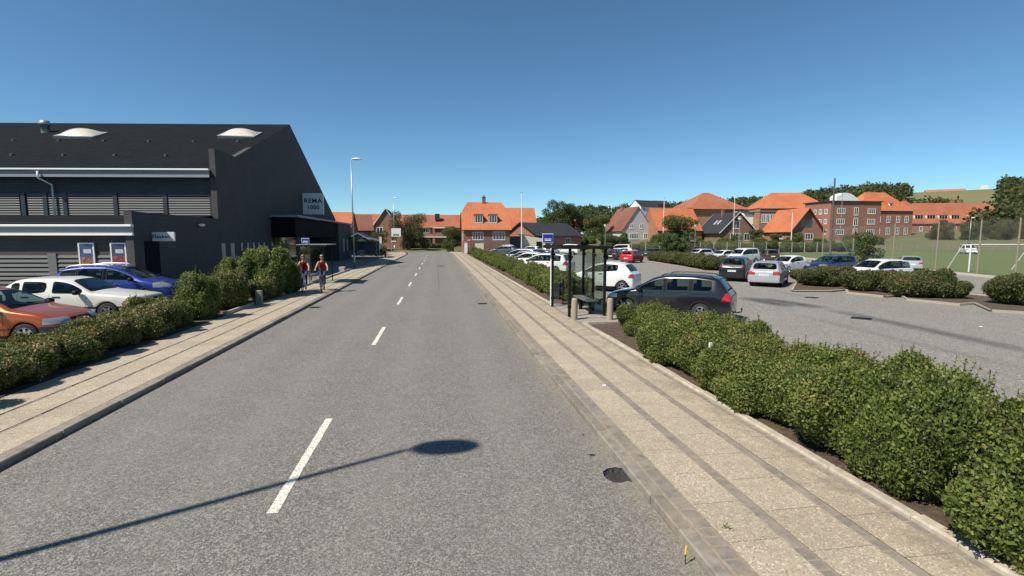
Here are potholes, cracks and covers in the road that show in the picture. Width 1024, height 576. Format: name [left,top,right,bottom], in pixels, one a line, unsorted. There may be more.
pothole [603,467,632,483]
